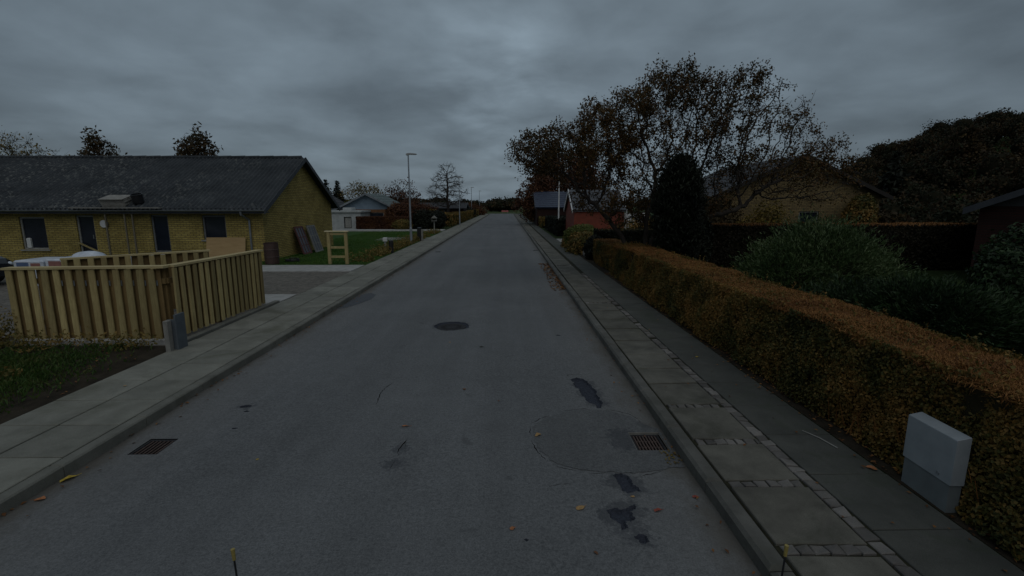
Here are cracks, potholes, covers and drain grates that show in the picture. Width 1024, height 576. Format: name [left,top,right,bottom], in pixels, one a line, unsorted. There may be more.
drain grate [129,440,176,455]
manhole cover [434,322,469,331]
drain grate [628,432,667,450]
